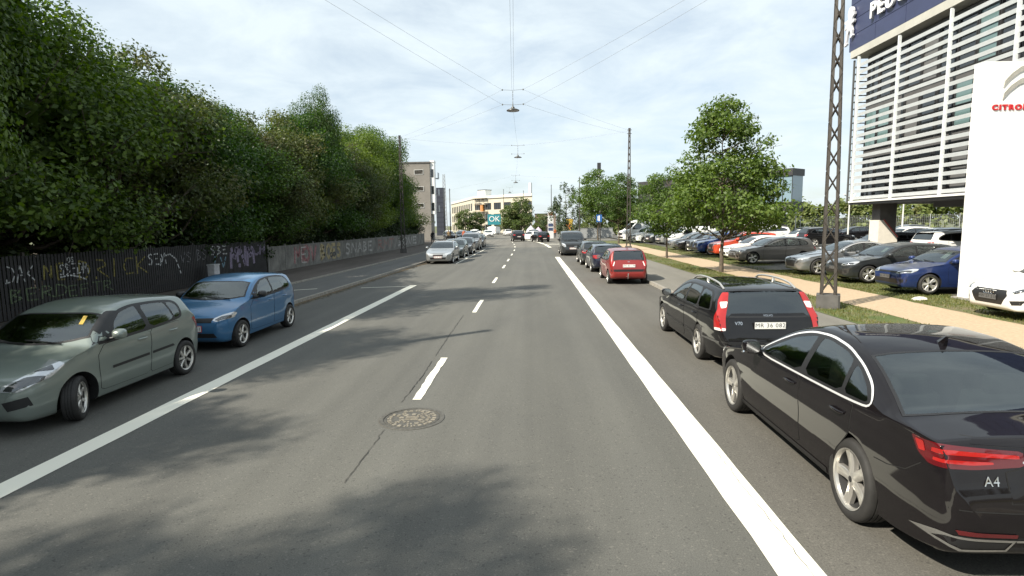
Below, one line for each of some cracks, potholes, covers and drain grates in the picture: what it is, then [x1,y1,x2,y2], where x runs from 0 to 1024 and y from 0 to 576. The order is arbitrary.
manhole cover [379,407,445,430]
